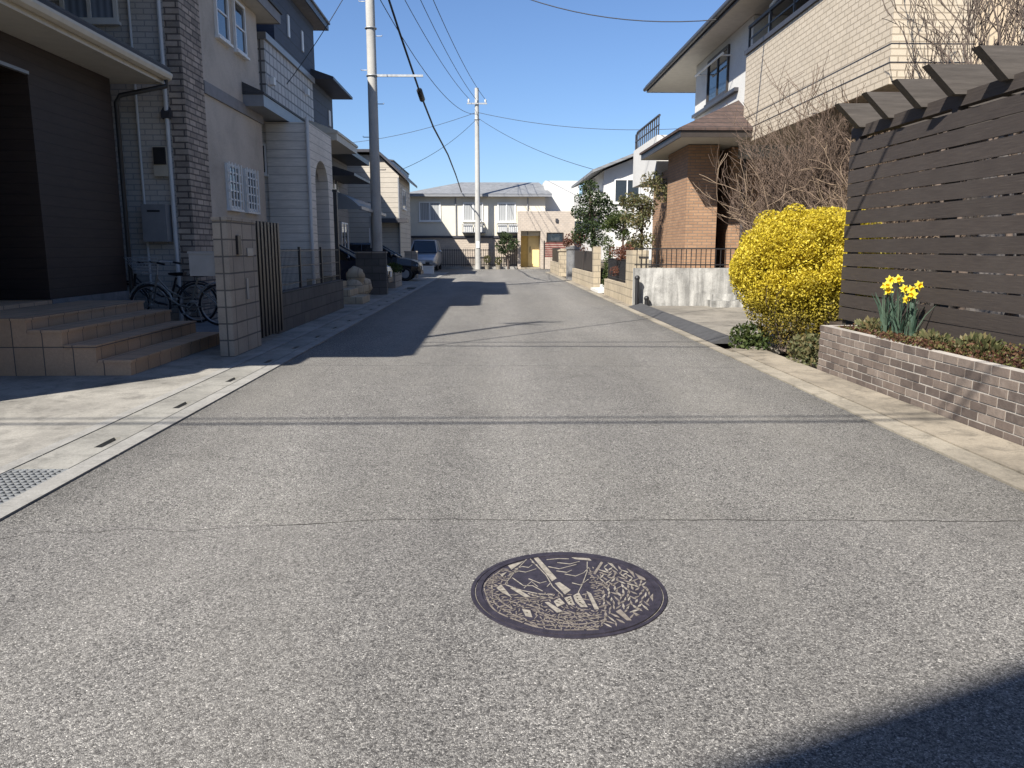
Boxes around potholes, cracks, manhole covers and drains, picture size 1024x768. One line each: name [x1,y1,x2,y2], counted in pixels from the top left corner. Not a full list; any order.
manhole cover [471,552,668,639]
drain grate [0,469,68,504]
